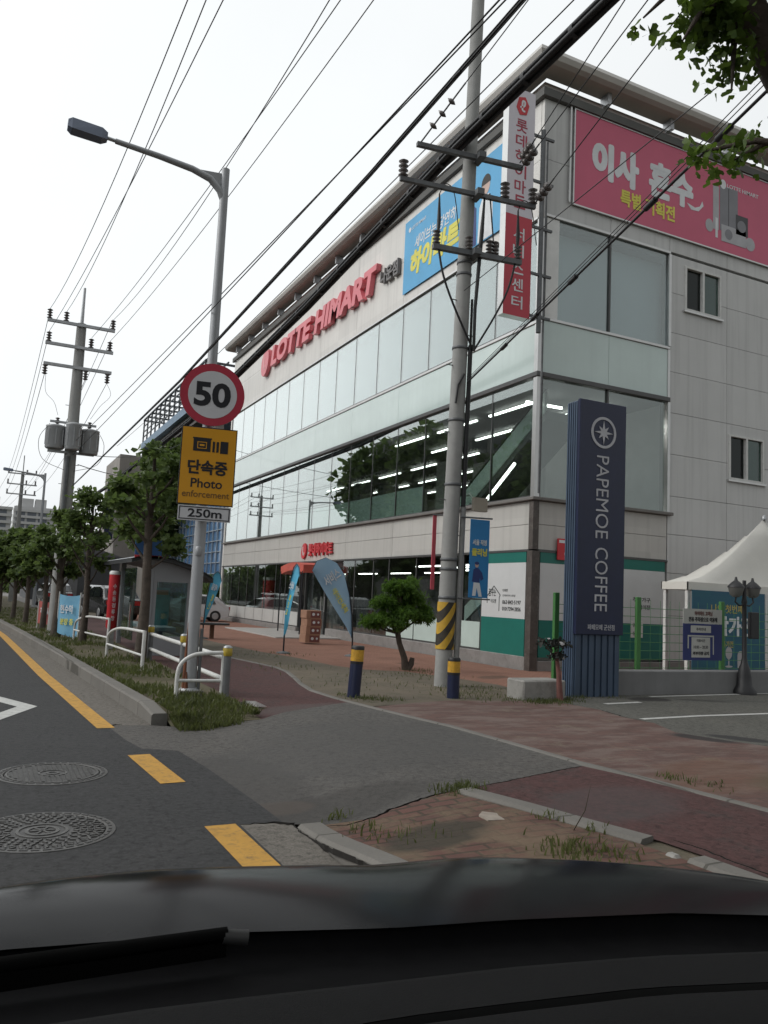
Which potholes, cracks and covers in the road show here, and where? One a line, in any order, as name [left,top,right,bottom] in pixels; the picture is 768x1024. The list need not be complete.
crack [674,840,768,875]
crack [478,766,581,787]
manhole cover [0,762,108,786]
manhole cover [0,812,116,854]
